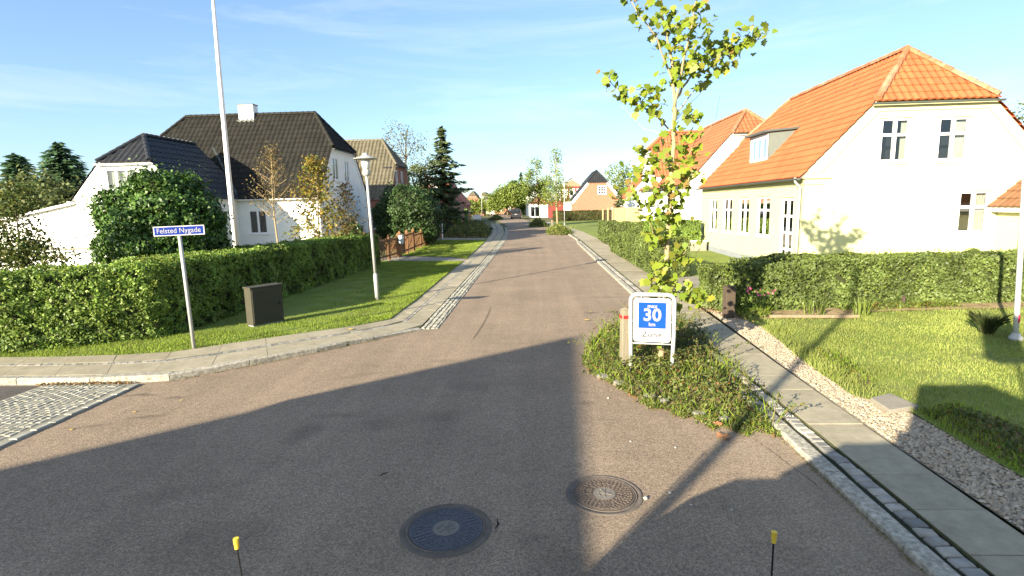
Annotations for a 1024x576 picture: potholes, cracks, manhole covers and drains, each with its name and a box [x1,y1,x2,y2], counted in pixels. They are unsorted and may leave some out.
manhole cover [399,504,492,558]
manhole cover [566,475,643,516]
